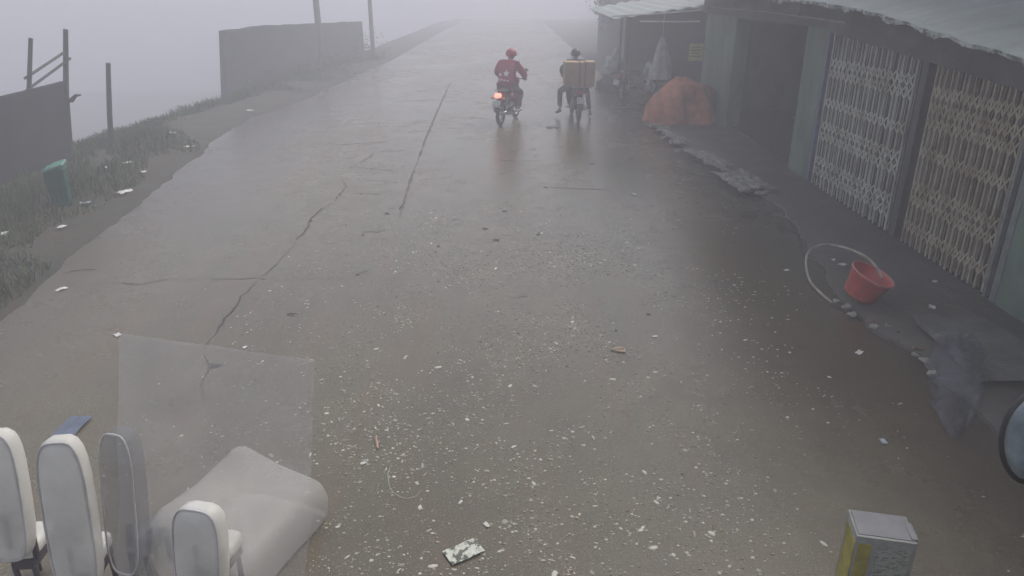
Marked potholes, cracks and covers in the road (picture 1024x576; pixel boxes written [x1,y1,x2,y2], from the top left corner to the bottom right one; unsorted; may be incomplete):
crack [200,142,406,398]
